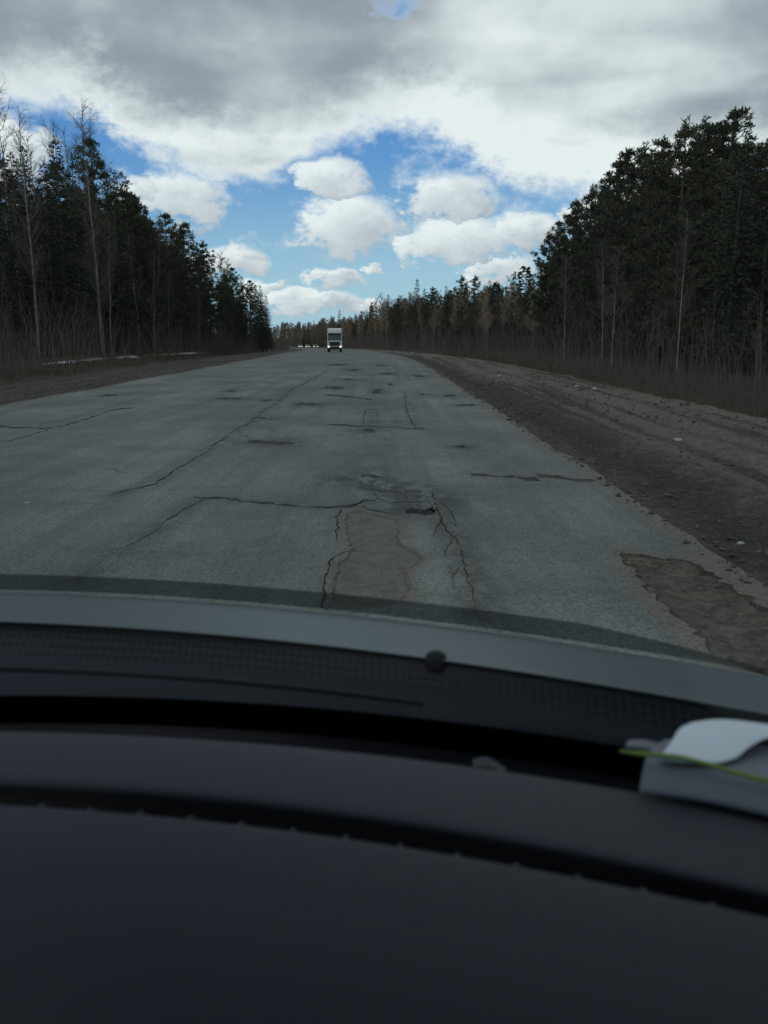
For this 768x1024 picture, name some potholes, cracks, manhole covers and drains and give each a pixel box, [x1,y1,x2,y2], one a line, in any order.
crack [102,368,426,497]
pothole [406,507,436,515]
crack [0,407,134,442]
crack [82,473,595,611]
